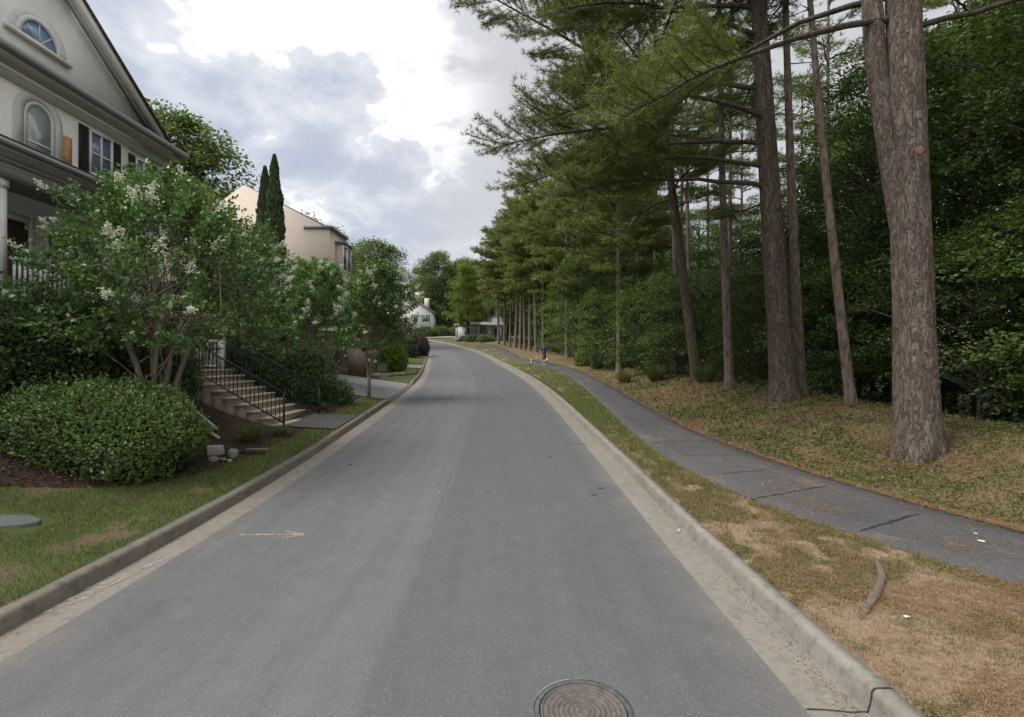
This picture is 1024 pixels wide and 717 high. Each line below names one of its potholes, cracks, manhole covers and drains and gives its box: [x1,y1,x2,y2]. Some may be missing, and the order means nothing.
utility cover [0,514,41,528]
manhole cover [533,679,635,717]
